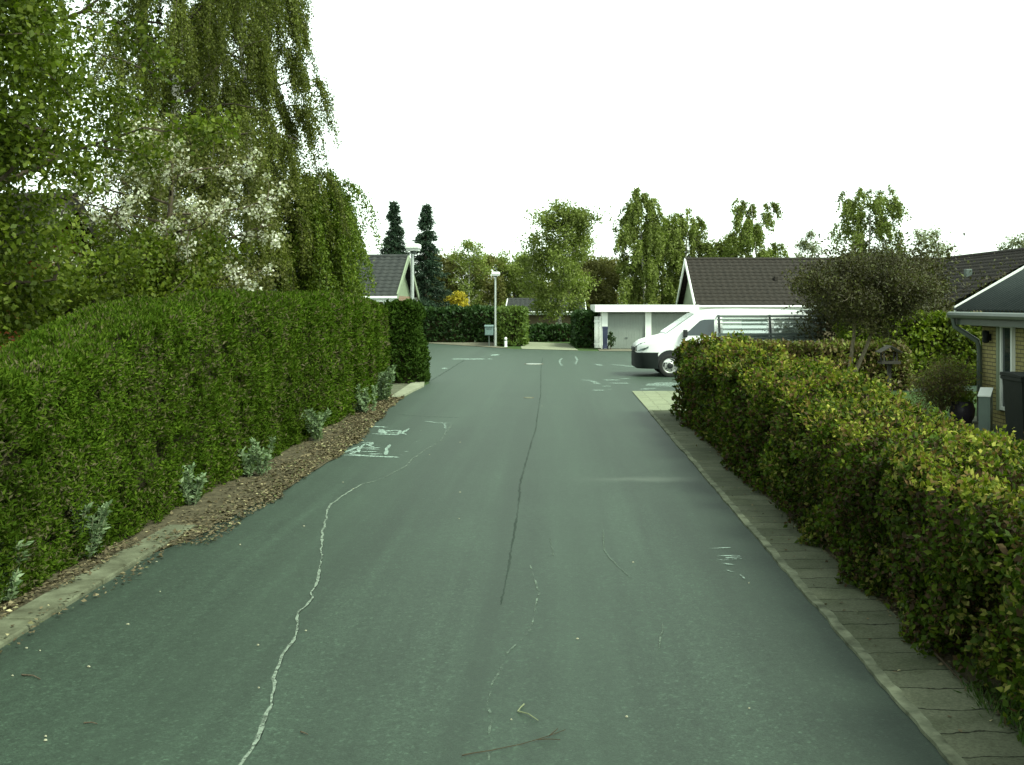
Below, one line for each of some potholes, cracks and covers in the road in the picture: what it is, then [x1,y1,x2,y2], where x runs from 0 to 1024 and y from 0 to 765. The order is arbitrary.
crack [238,414,459,765]
crack [488,565,540,760]
